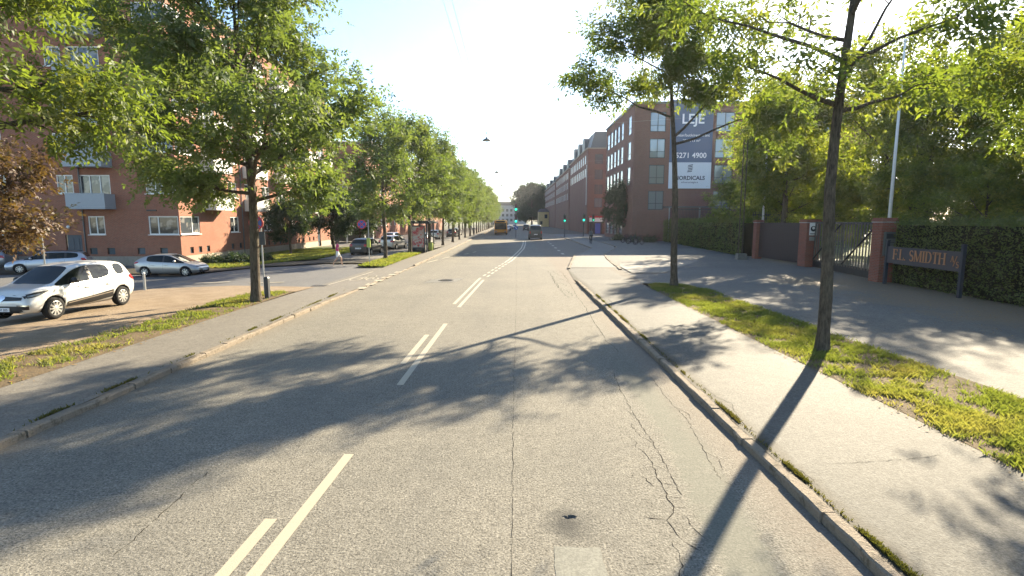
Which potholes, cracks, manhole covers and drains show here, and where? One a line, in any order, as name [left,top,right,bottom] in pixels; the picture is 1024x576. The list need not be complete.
crack [614,374,703,576]
crack [113,470,211,556]
crack [548,271,619,352]
crack [652,378,733,486]
